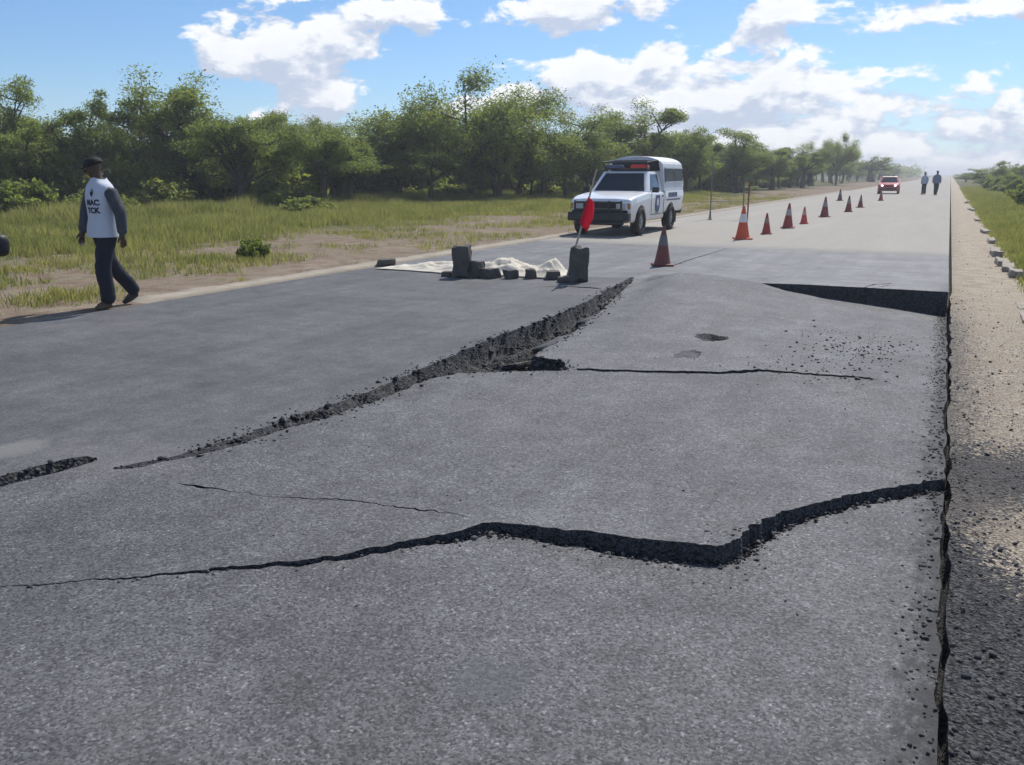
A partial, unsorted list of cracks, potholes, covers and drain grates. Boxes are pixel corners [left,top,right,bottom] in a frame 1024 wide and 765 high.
pothole [695,333,729,341]
crack [0,277,952,587]
